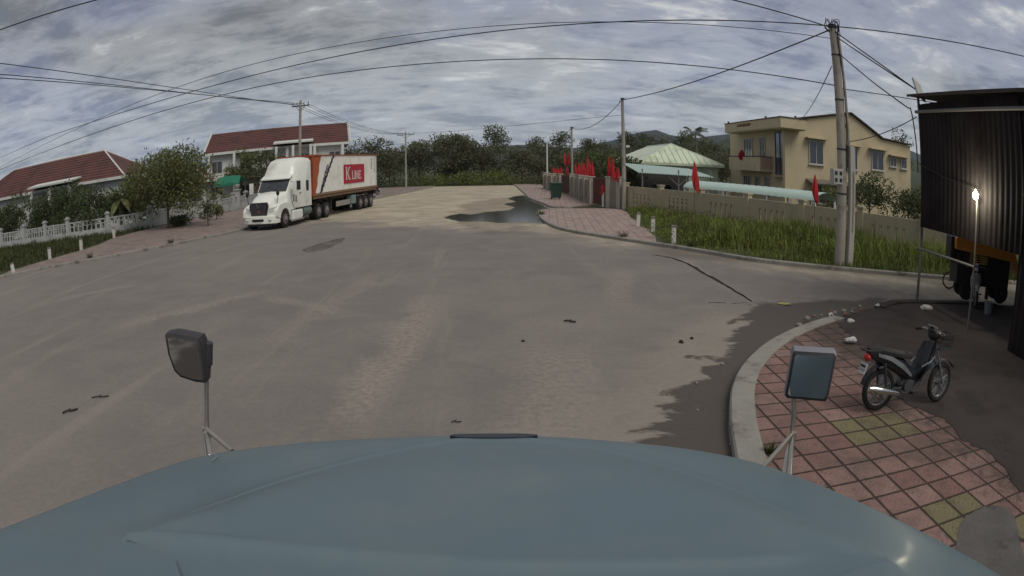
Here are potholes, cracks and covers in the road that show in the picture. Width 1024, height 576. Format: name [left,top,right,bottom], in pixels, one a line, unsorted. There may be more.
crack [656,255,752,304]
